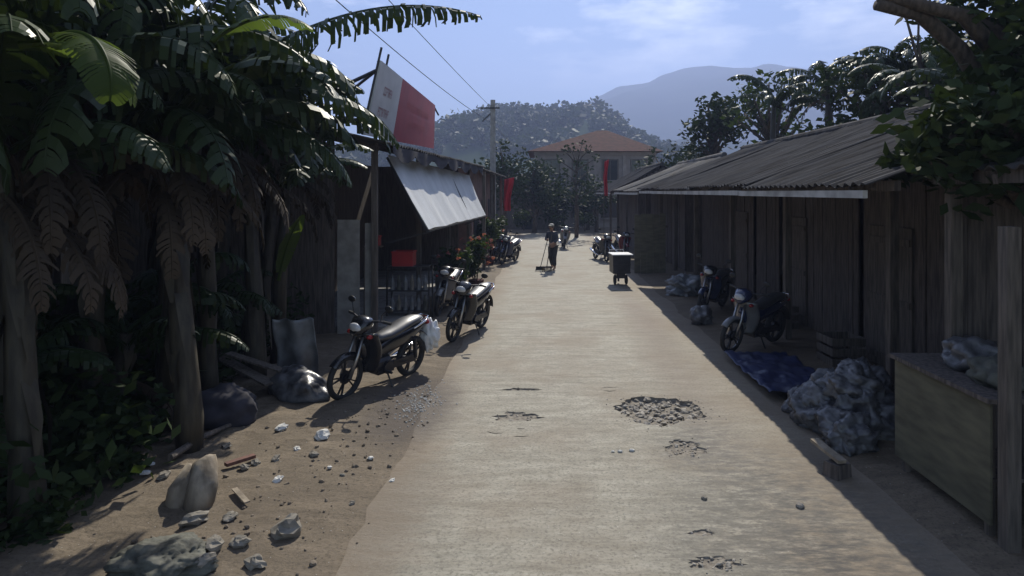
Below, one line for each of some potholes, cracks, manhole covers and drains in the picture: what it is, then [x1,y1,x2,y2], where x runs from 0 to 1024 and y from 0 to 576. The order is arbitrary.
pothole [493,411,545,421]
pothole [685,528,715,536]
pothole [657,437,708,462]
pothole [689,556,748,574]
pothole [606,395,720,432]
